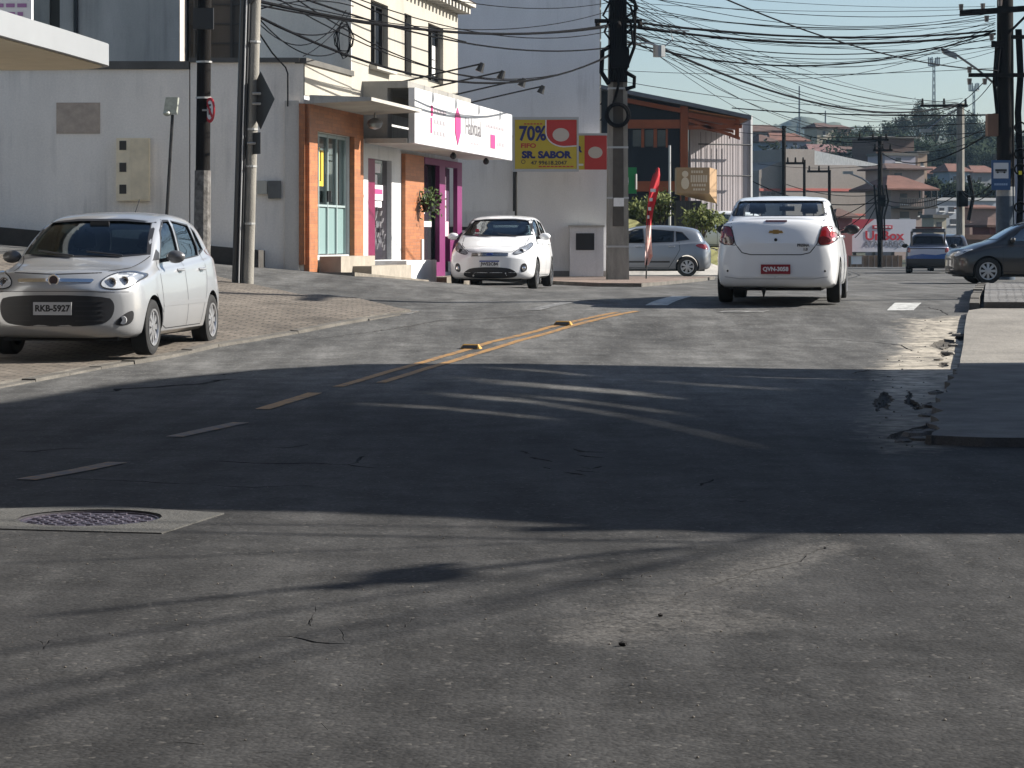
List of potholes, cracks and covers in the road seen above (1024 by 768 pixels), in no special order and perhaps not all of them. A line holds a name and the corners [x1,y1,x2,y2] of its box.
pothole [930,339,956,349]
crack [520,449,603,485]
crack [288,606,346,644]
pothole [872,391,895,412]
pothole [904,390,921,410]
pothole [887,425,928,440]
manhole cover [0,505,224,534]
crack [223,444,373,468]
